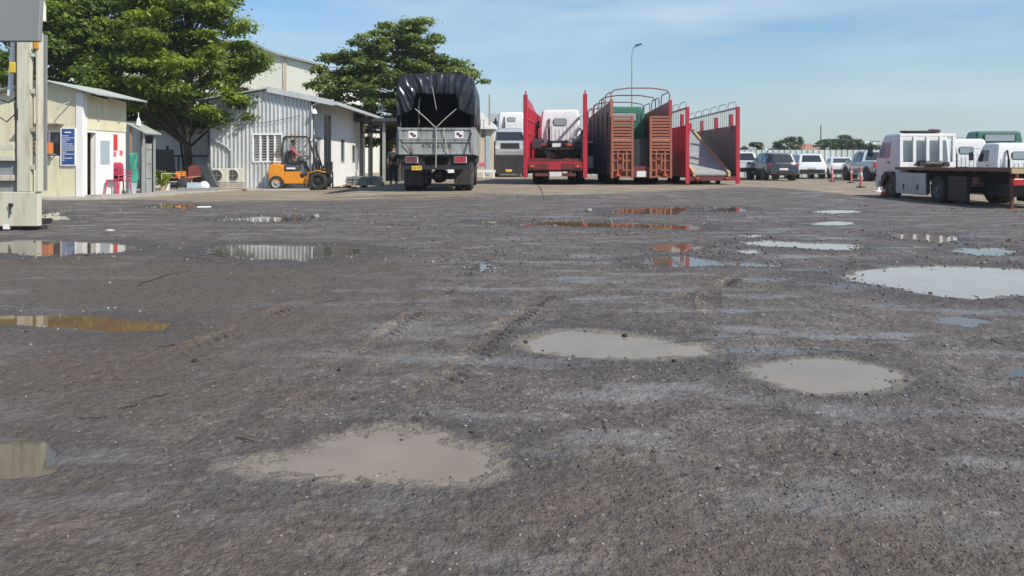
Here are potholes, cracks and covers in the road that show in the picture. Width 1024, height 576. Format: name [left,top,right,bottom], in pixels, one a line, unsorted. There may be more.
pothole [0,308,200,338]
pothole [937,244,1024,257]
pothole [463,219,744,231]
crack [79,393,174,418]
pothole [905,311,1017,330]
pothole [722,238,888,252]
pothole [173,241,401,266]
pothole [180,414,538,503]
pothole [714,352,940,404]
pothole [494,323,743,368]
pothole [0,423,90,489]
pothole [796,259,1024,309]
